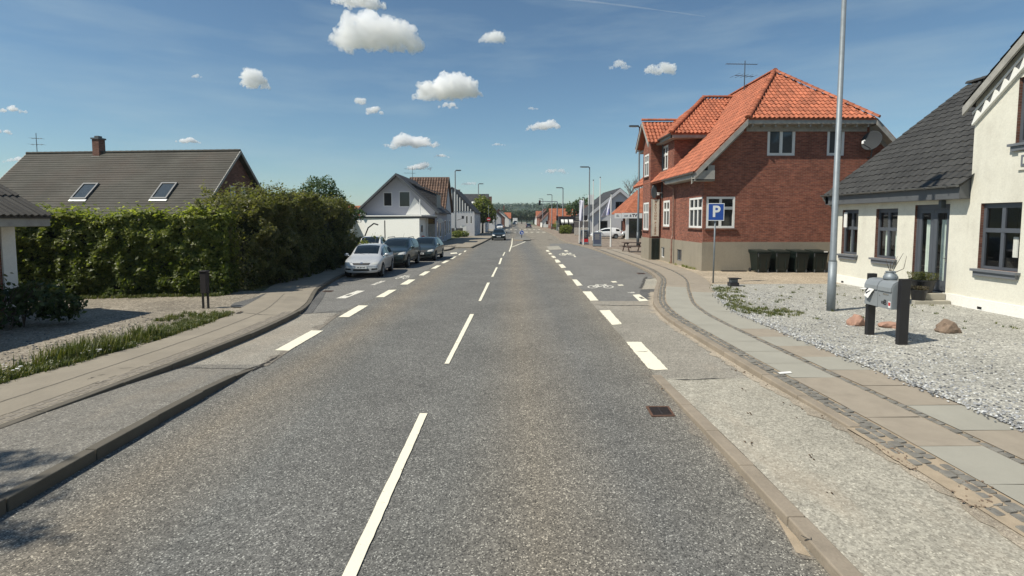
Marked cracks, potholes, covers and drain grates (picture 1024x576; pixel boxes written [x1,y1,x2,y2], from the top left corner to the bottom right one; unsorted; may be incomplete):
drain grate [646,406,675,417]
